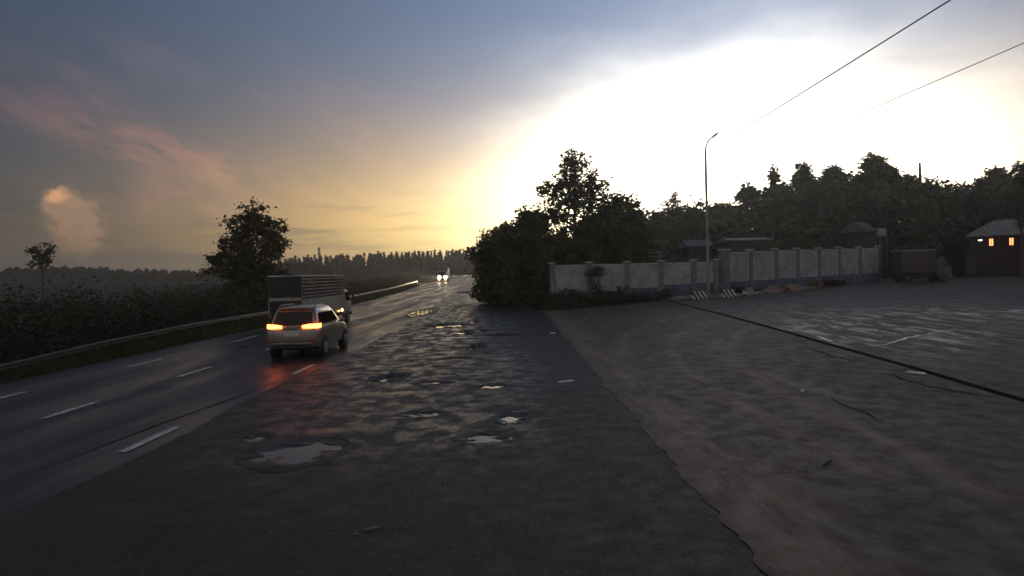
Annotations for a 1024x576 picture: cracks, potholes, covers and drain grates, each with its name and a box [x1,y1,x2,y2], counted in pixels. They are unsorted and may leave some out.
crack [831,397,884,422]
pothole [450,432,521,447]
pothole [489,414,533,425]
pothole [239,431,277,443]
crack [794,322,854,363]
pothole [368,372,411,384]
pothole [463,343,487,351]
pothole [393,411,452,419]
crack [890,374,1001,400]
pothole [404,308,440,317]
pothole [234,438,358,474]
